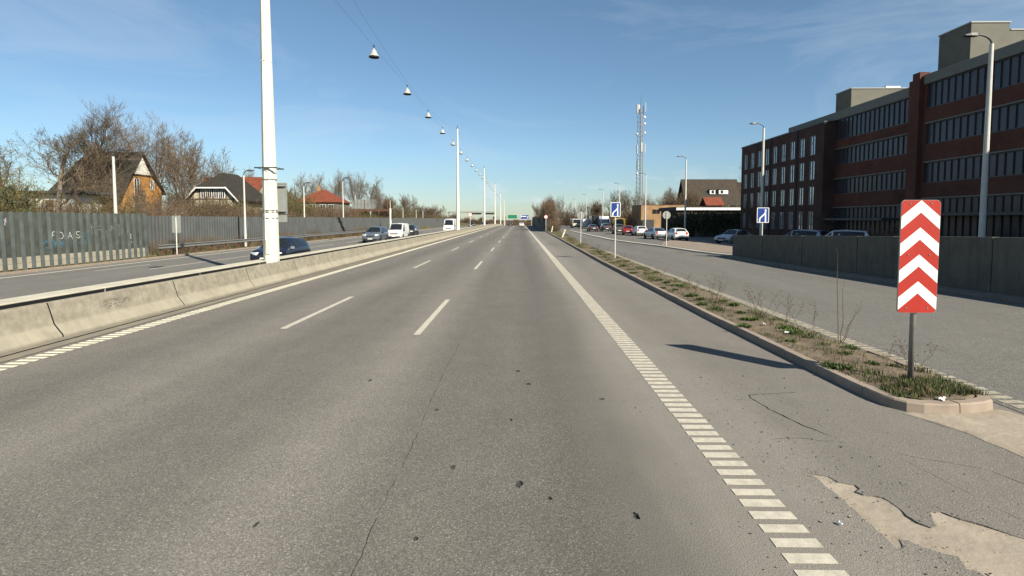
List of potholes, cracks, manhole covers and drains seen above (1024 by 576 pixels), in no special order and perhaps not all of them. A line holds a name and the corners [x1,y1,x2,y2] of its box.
crack [351,345,459,576]
crack [897,452,1024,520]
crack [740,392,827,442]
